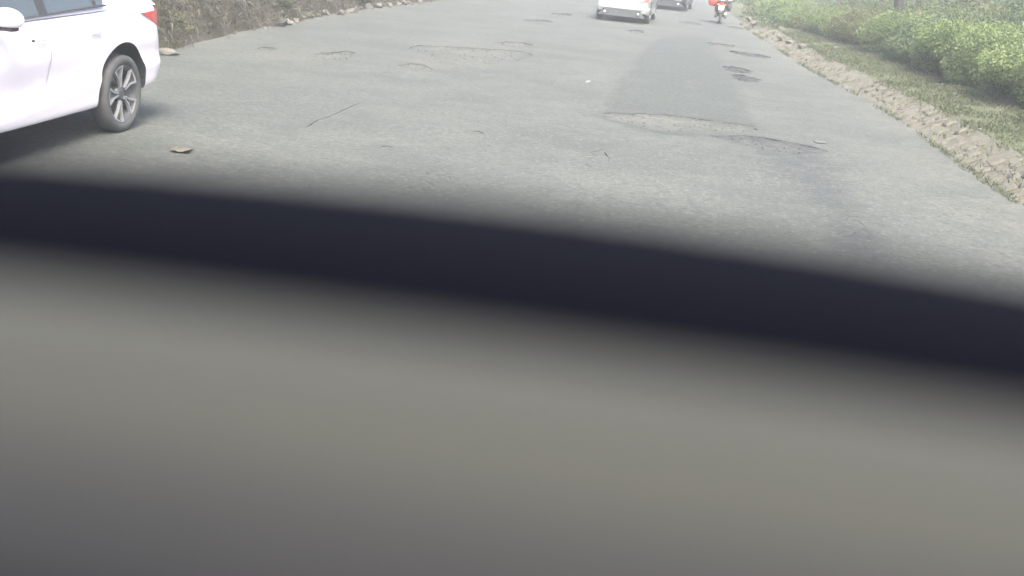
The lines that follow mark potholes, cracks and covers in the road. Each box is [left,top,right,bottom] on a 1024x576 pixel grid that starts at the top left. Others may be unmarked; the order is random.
pothole [314,51,355,61]
crack [816,213,879,243]
pothole [601,113,757,133]
pothole [729,50,771,59]
pothole [731,74,760,82]
pothole [711,135,828,155]
pothole [410,45,533,65]
pothole [398,63,432,71]
